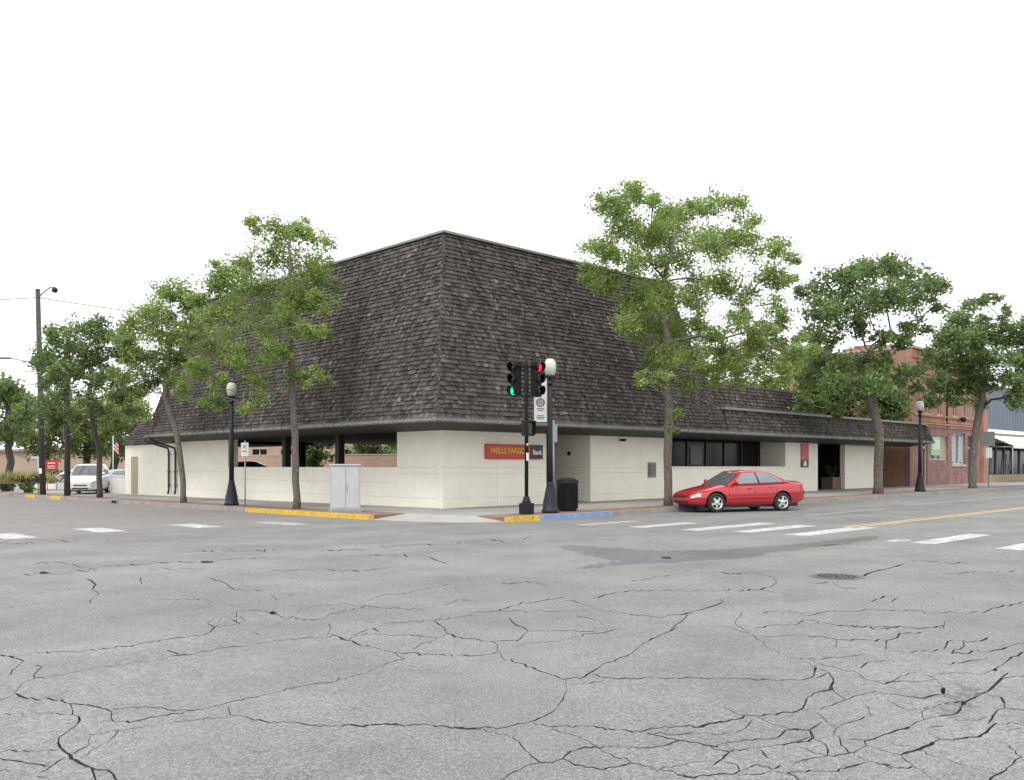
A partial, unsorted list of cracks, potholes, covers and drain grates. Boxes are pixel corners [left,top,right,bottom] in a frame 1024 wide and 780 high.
crack [224,602,1024,780]
crack [808,559,1015,602]
crack [0,537,812,780]
